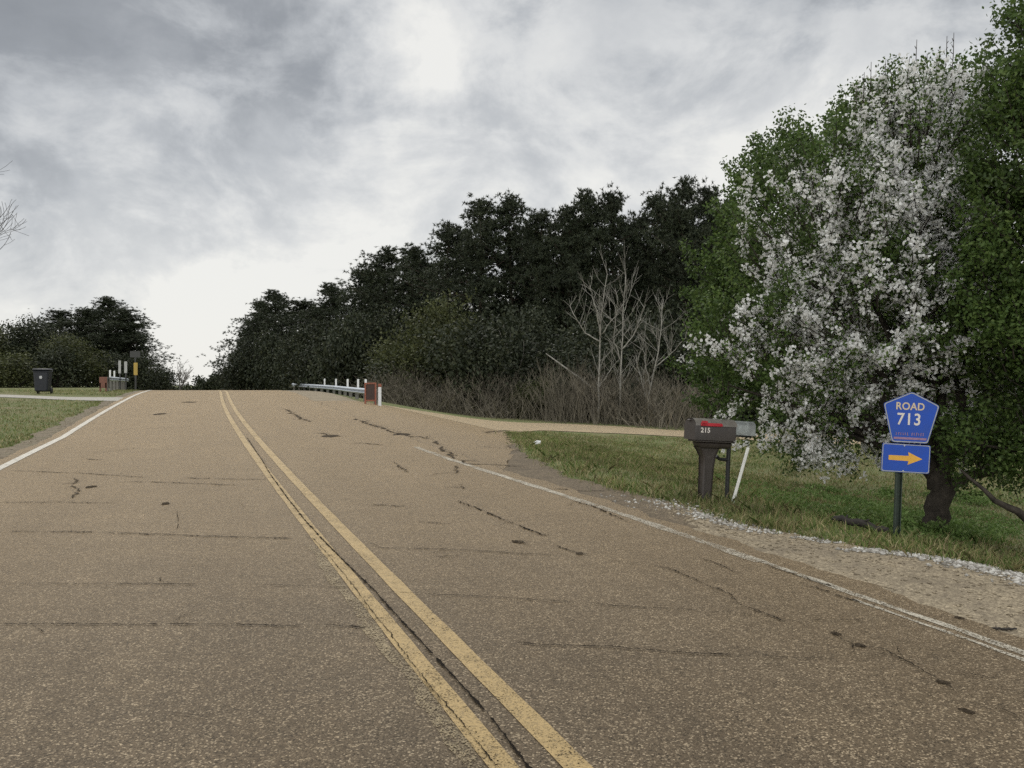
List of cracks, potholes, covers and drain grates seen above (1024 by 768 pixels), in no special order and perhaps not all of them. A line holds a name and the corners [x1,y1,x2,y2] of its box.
crack [393,559,799,622]
crack [15,513,281,538]
crack [768,564,997,691]
crack [7,449,253,503]
crack [377,430,590,557]
